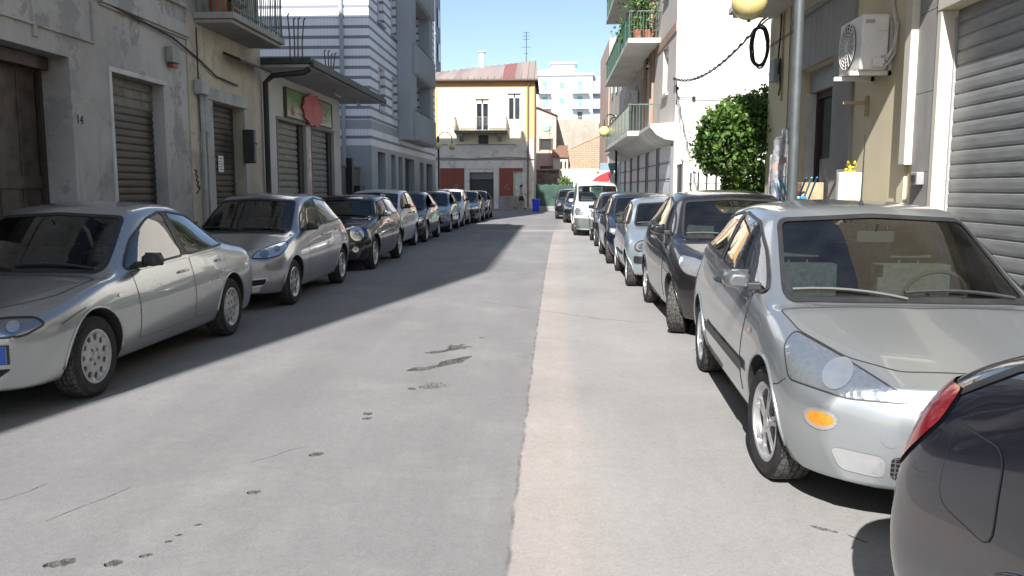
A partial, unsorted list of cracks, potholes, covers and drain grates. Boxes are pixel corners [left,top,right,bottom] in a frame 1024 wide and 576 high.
pothole [425,345,472,354]
pothole [42,558,77,568]
pothole [407,356,472,371]
